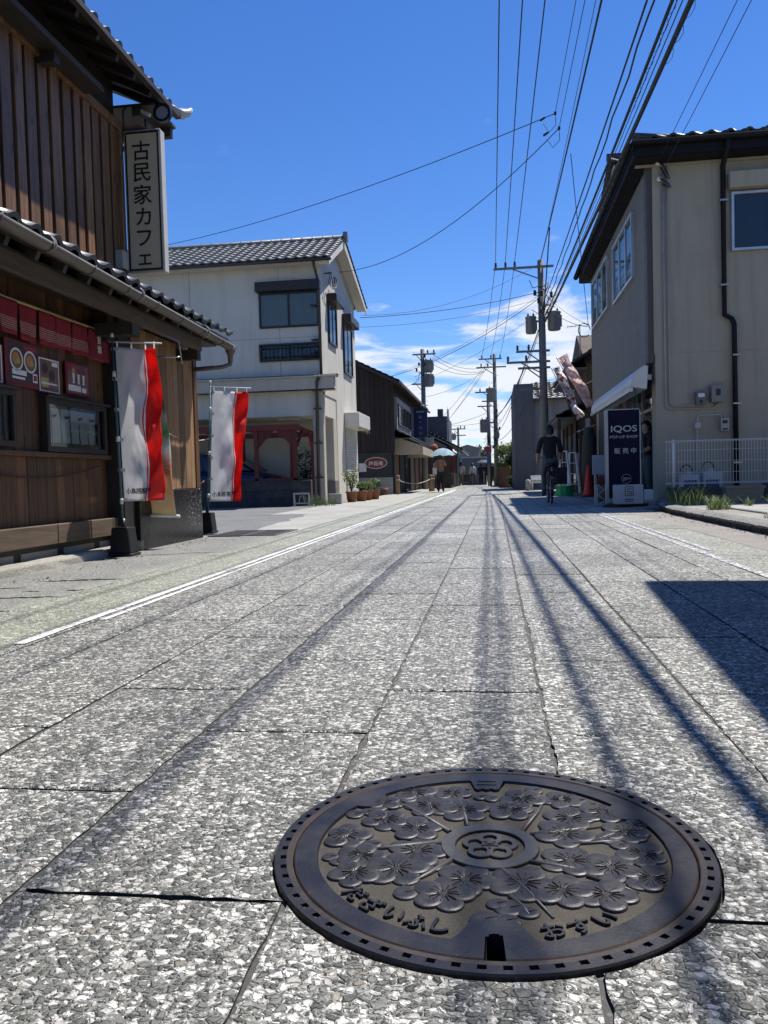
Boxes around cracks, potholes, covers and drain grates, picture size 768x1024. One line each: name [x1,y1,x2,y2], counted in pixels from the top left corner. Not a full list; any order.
manhole cover [274,768,722,983]
